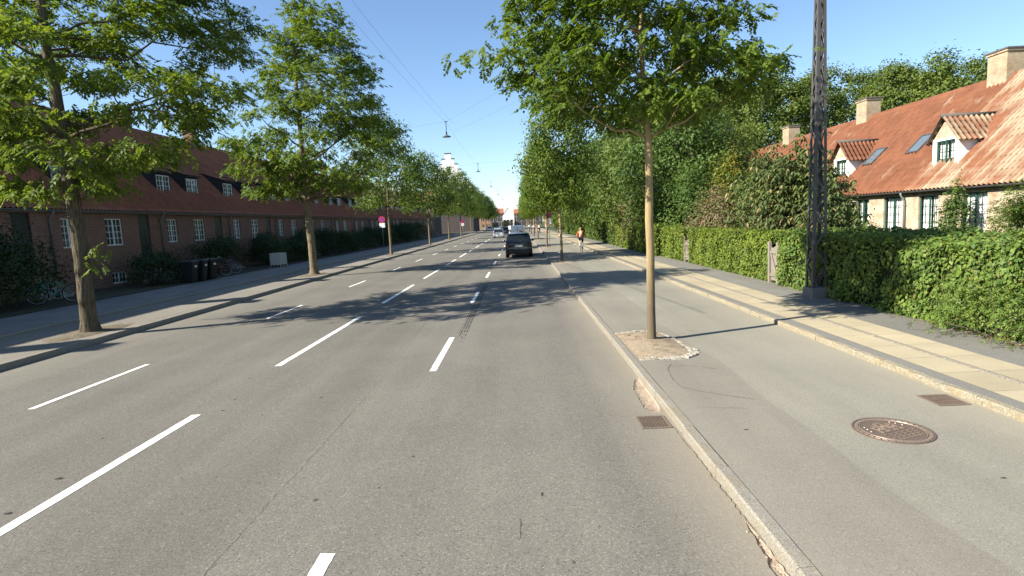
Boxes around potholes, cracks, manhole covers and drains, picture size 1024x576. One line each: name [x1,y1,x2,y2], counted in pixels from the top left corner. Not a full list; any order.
drain grate [635,415,672,429]
pothole [632,378,660,413]
manhole cover [851,417,937,444]
drain grate [916,394,971,406]
